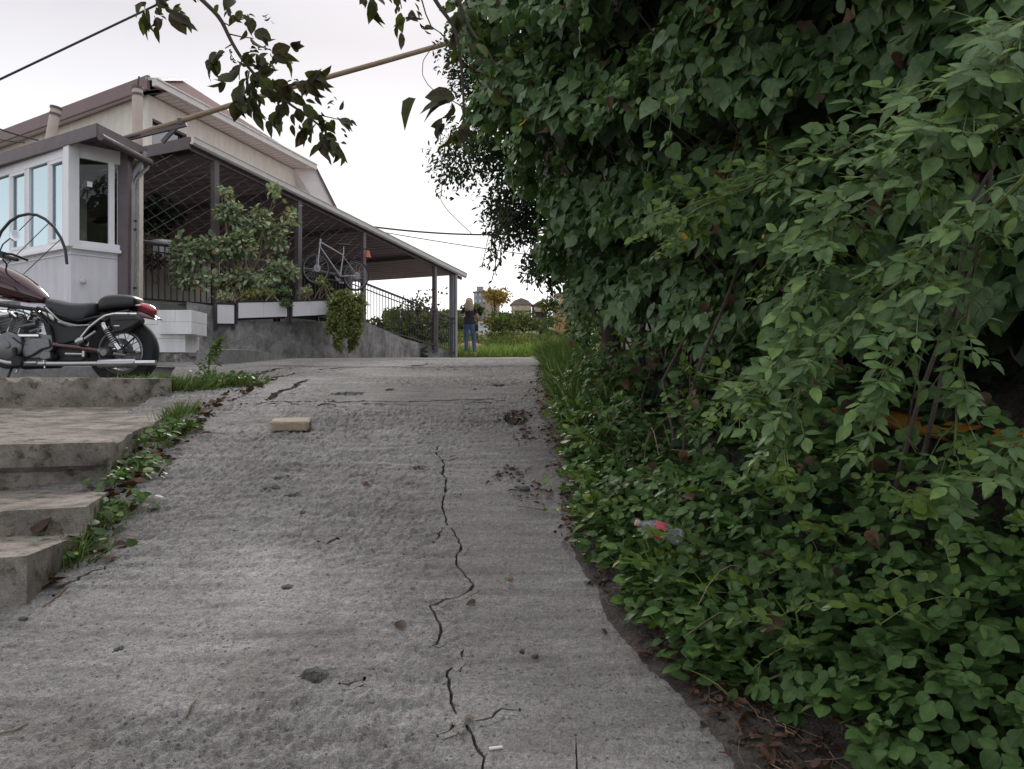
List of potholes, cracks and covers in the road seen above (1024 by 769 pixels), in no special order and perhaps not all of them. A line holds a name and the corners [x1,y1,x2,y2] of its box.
crack [422,445,519,769]
pothole [296,664,334,686]
crack [242,367,506,410]
crack [52,565,104,596]
pothole [501,409,534,427]
